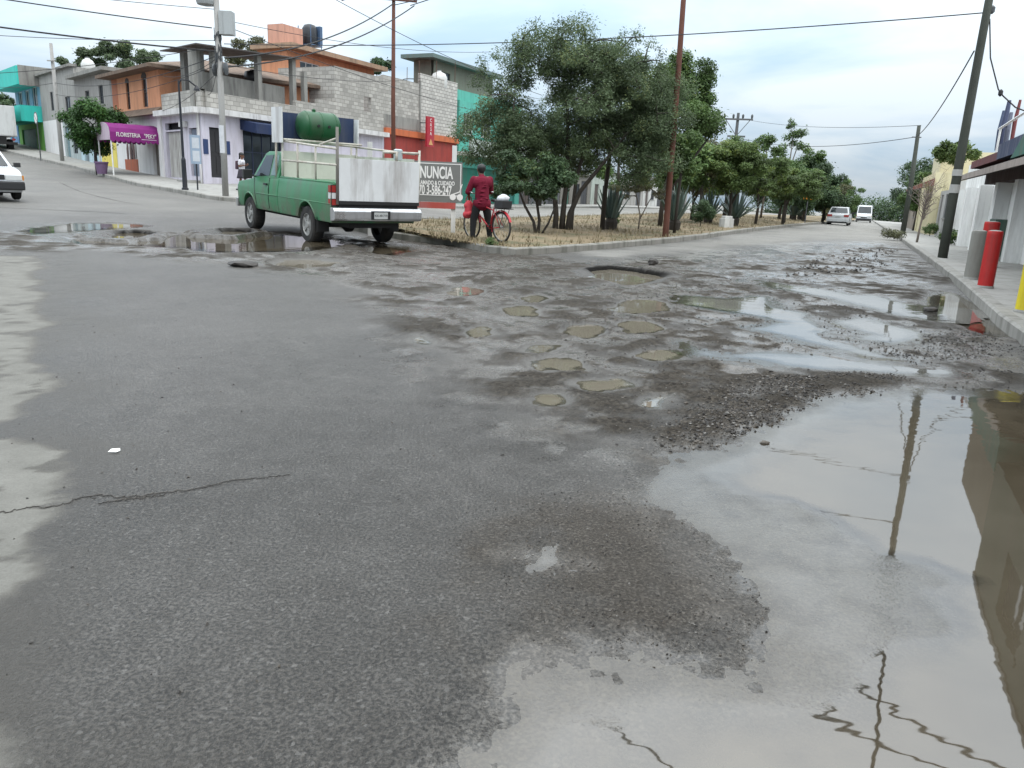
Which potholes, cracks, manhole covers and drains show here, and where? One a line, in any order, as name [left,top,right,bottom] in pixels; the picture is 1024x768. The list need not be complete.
pothole [611,318,670,334]
pothole [602,298,677,315]
pothole [461,323,501,338]
crack [0,474,290,513]
pothole [495,304,545,317]
pothole [516,341,574,354]
pothole [516,293,552,303]
pothole [525,388,577,408]
pothole [558,320,612,339]
pothole [89,229,158,238]
pothole [624,345,692,363]
pothole [440,285,489,297]
